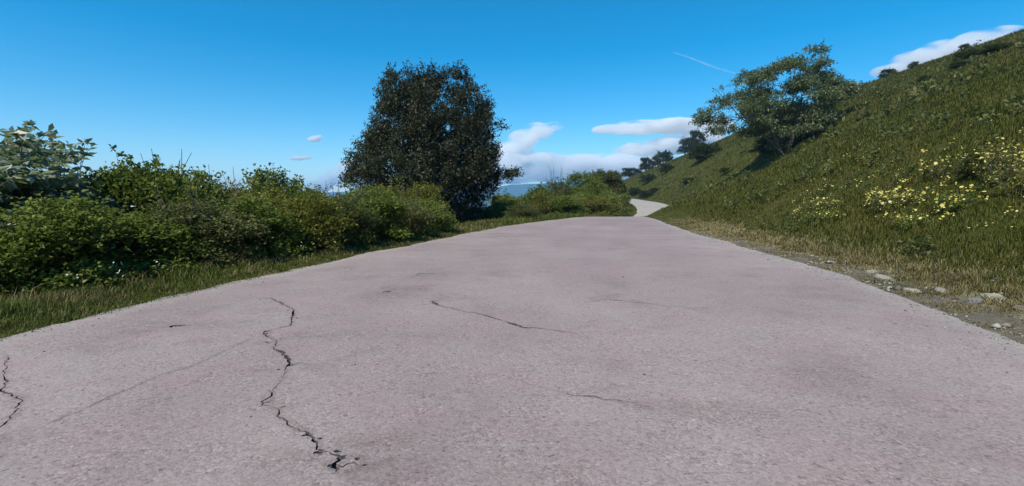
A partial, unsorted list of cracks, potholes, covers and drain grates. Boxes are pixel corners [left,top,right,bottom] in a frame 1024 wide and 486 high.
crack [261,298,367,472]
crack [431,301,564,332]
crack [0,358,23,427]
